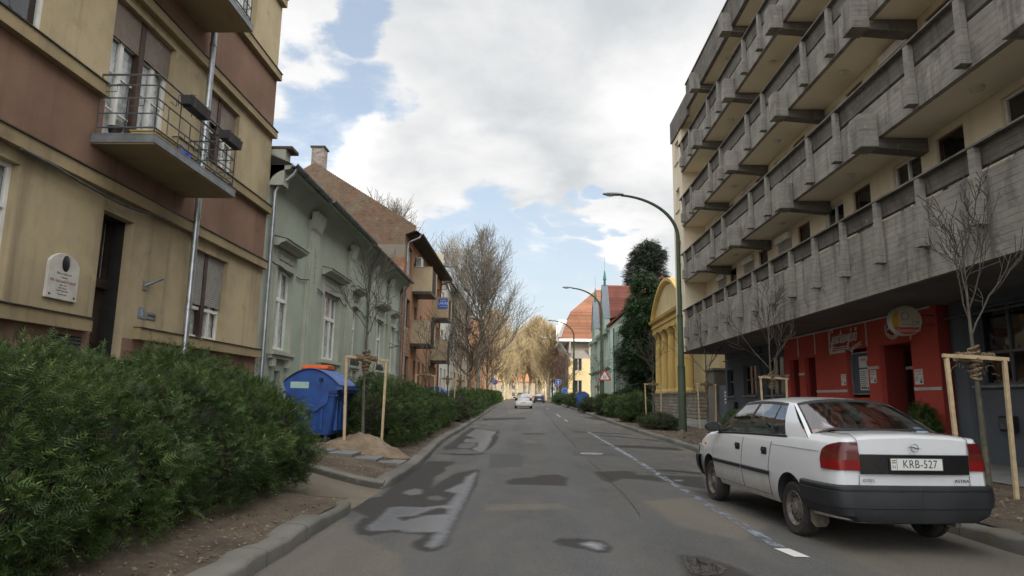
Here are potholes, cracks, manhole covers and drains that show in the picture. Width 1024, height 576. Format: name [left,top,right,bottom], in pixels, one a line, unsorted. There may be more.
pothole [683,555,728,576]
